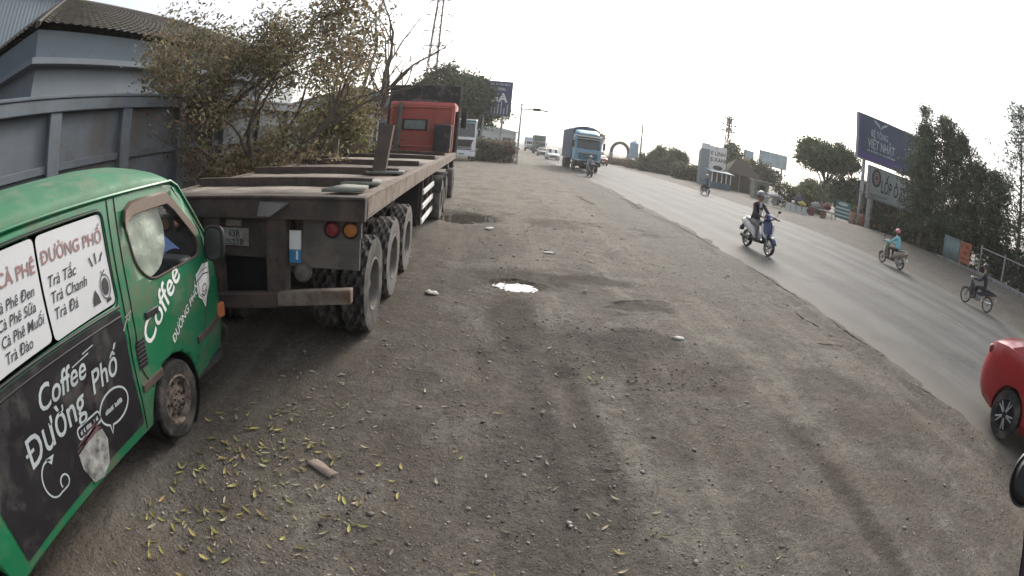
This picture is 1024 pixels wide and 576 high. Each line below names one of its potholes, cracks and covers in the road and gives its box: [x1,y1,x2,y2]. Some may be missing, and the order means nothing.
pothole [475,276,559,296]
pothole [590,298,684,316]
pothole [425,210,517,227]
